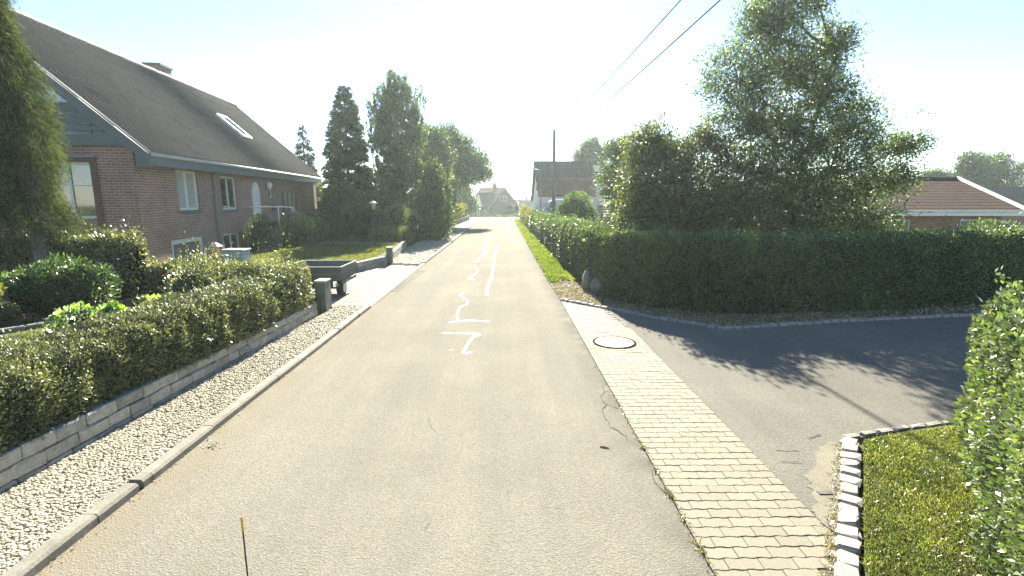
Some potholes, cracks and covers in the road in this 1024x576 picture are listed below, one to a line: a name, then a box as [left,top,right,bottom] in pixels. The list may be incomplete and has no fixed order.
manhole cover [593,336,636,349]
